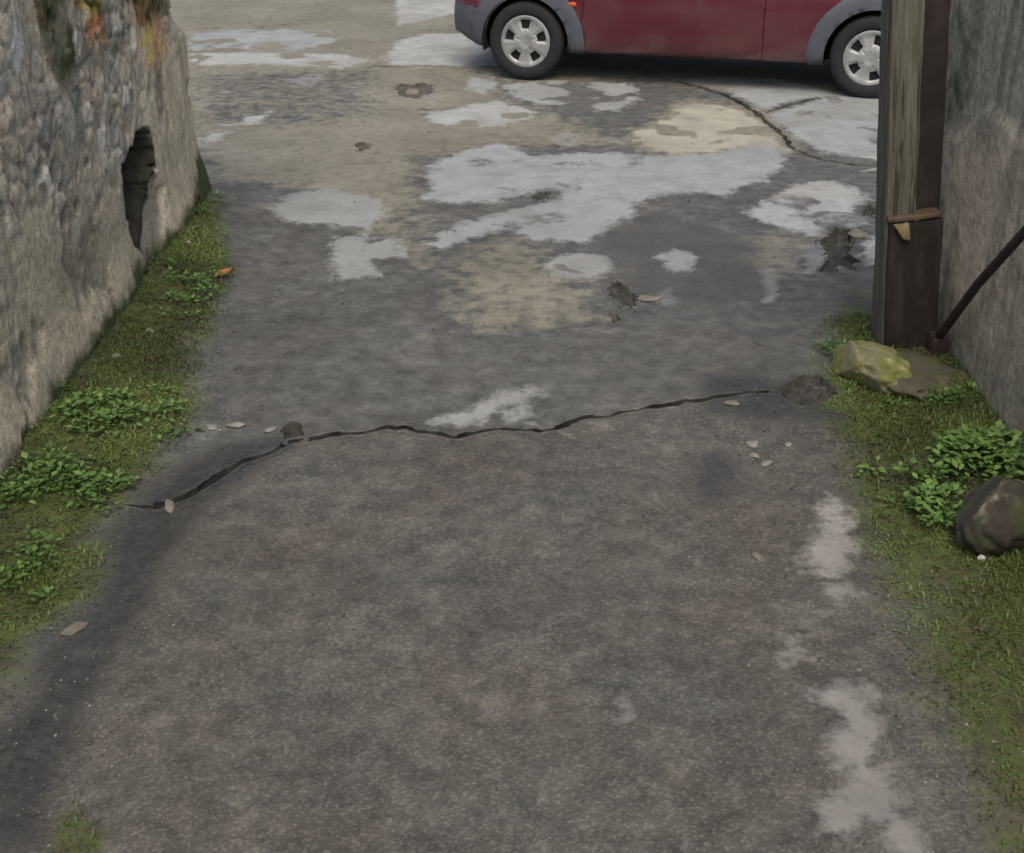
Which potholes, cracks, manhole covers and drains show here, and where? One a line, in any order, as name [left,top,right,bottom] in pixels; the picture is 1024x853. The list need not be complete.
crack [657,80,877,167]
pothole [815,226,864,276]
pothole [392,82,438,100]
pothole [274,419,310,446]
pothole [350,141,376,152]
pothole [604,312,626,326]
pothole [603,279,641,311]
crack [121,389,783,512]
pothole [768,373,843,408]
